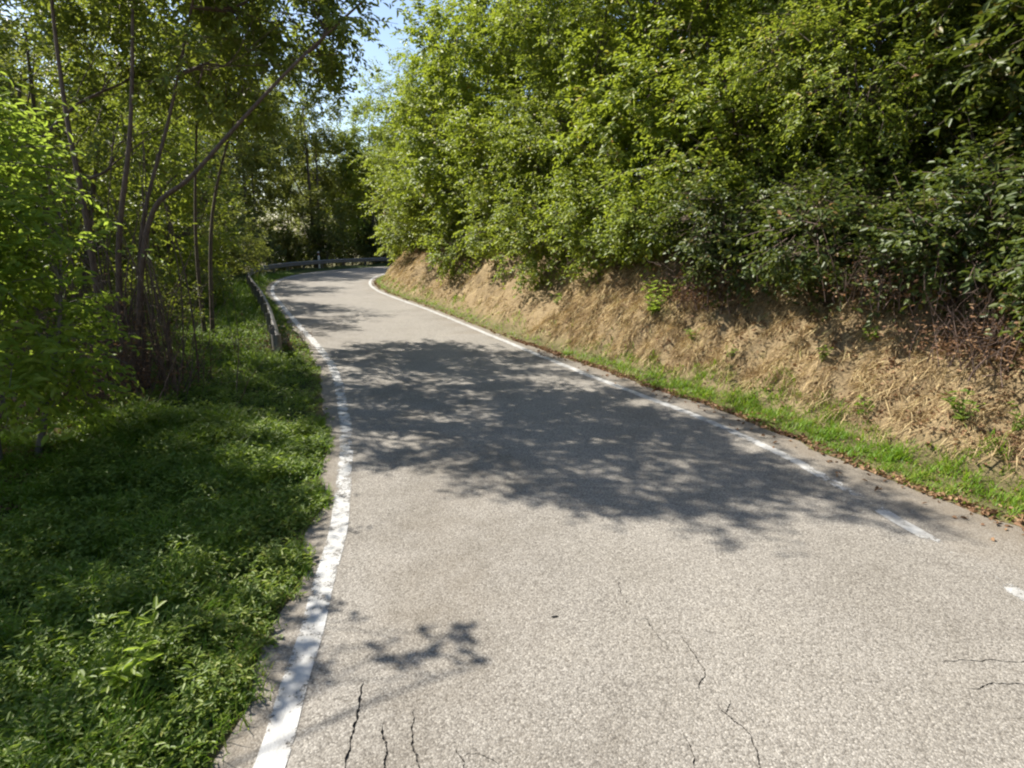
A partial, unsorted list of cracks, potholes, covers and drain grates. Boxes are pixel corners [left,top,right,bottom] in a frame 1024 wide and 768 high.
crack [381,723,389,768]
crack [618,584,761,768]
crack [411,710,421,768]
crack [345,682,364,768]
